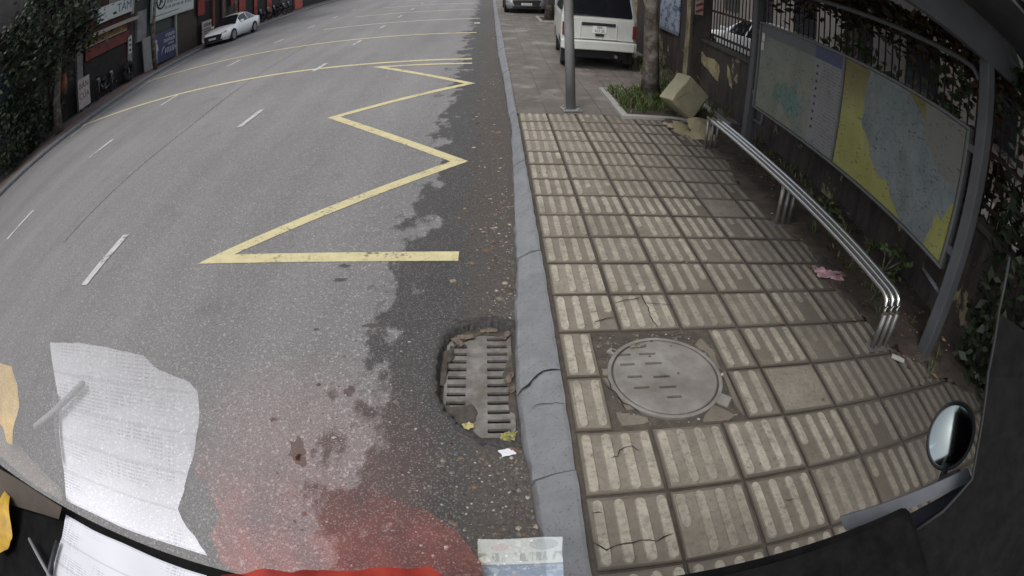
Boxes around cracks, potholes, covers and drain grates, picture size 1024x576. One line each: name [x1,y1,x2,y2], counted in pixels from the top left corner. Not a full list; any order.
crack [593,533,673,551]
crack [516,369,560,397]
manhole cover [607,338,732,420]
crack [595,294,672,328]
drain grate [443,336,516,440]
